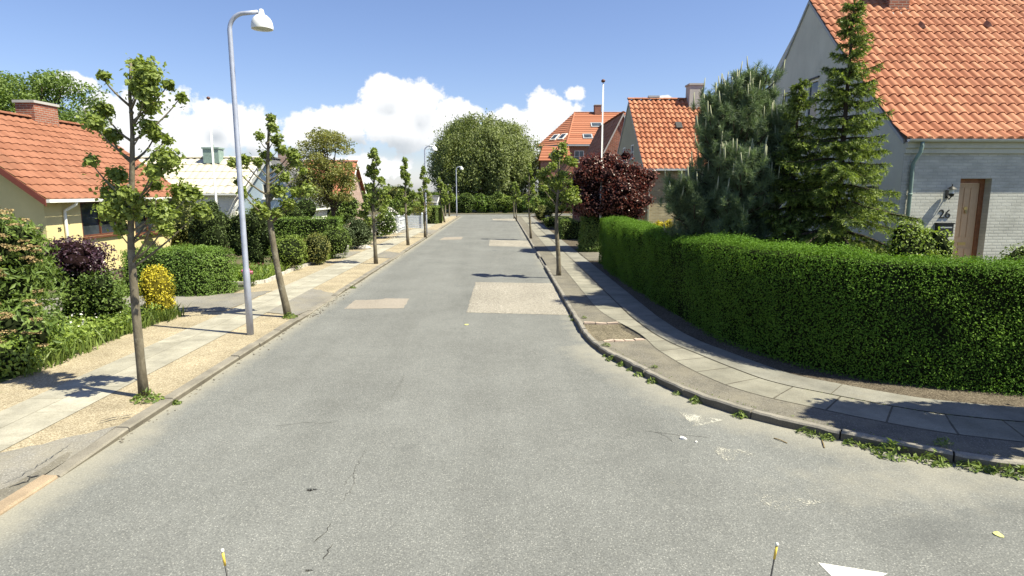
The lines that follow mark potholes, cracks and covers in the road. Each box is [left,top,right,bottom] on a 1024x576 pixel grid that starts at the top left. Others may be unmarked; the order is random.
crack [6,446,68,487]
